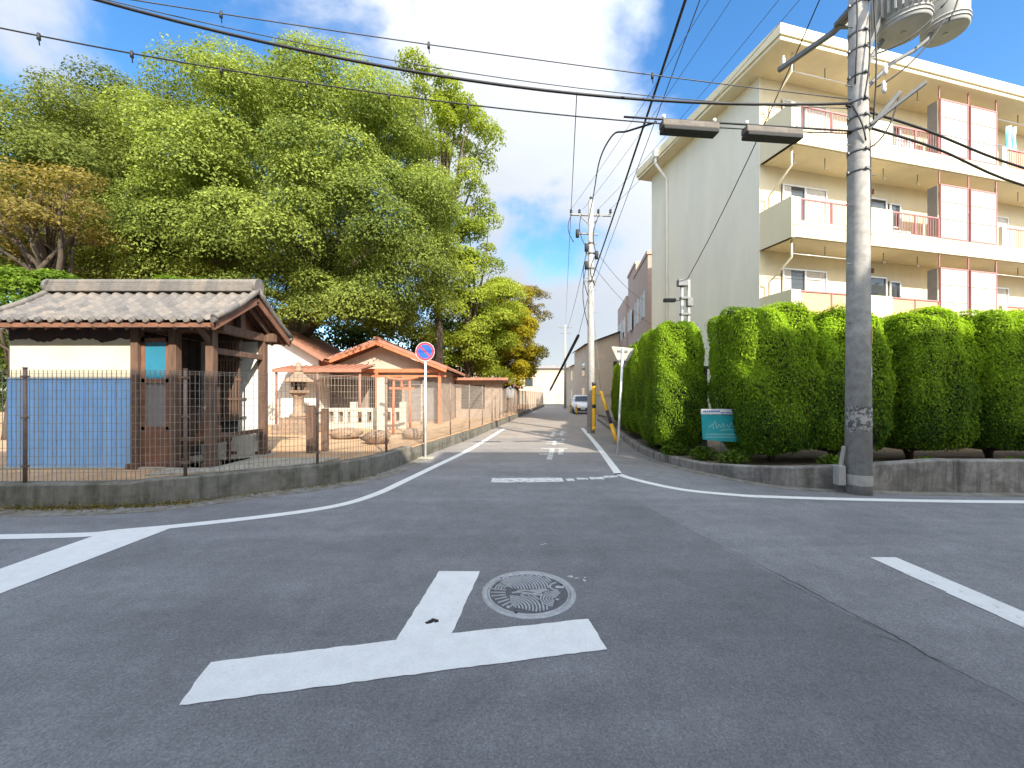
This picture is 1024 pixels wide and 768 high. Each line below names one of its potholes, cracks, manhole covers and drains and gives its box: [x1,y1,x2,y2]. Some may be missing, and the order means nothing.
manhole cover [482,571,576,619]
